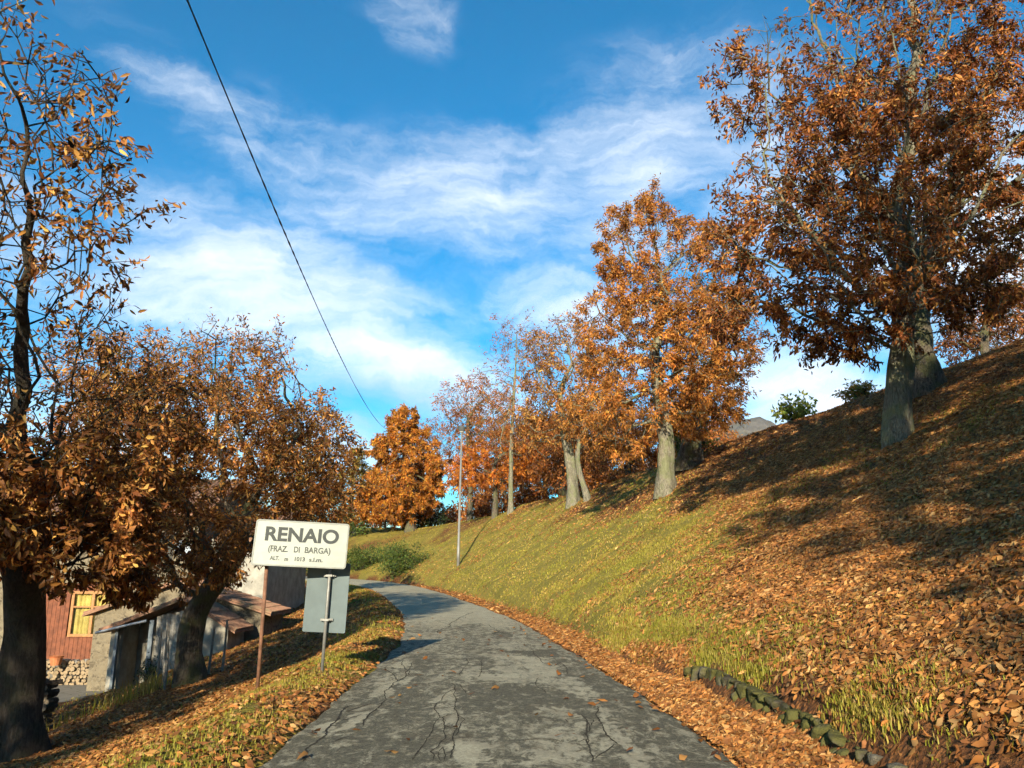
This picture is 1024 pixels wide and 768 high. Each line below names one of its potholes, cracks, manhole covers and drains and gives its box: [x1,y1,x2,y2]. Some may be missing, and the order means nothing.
crack [565,706,618,762]
crack [412,656,483,761]
crack [302,661,413,761]
